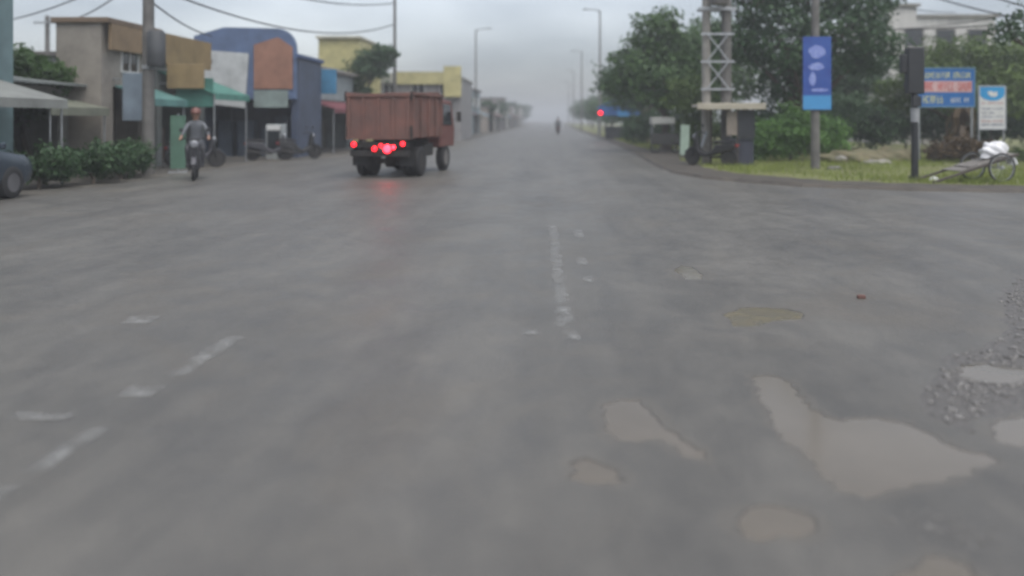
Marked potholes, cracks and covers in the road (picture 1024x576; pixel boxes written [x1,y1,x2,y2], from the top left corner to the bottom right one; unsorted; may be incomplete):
pothole [674,265,704,279]
pothole [736,504,818,542]
pothole [955,363,1024,384]
pothole [892,554,977,576]
pothole [600,399,706,459]
pothole [750,375,1001,500]
pothole [567,457,627,484]
pothole [990,416,1024,446]
pothole [723,307,805,326]
